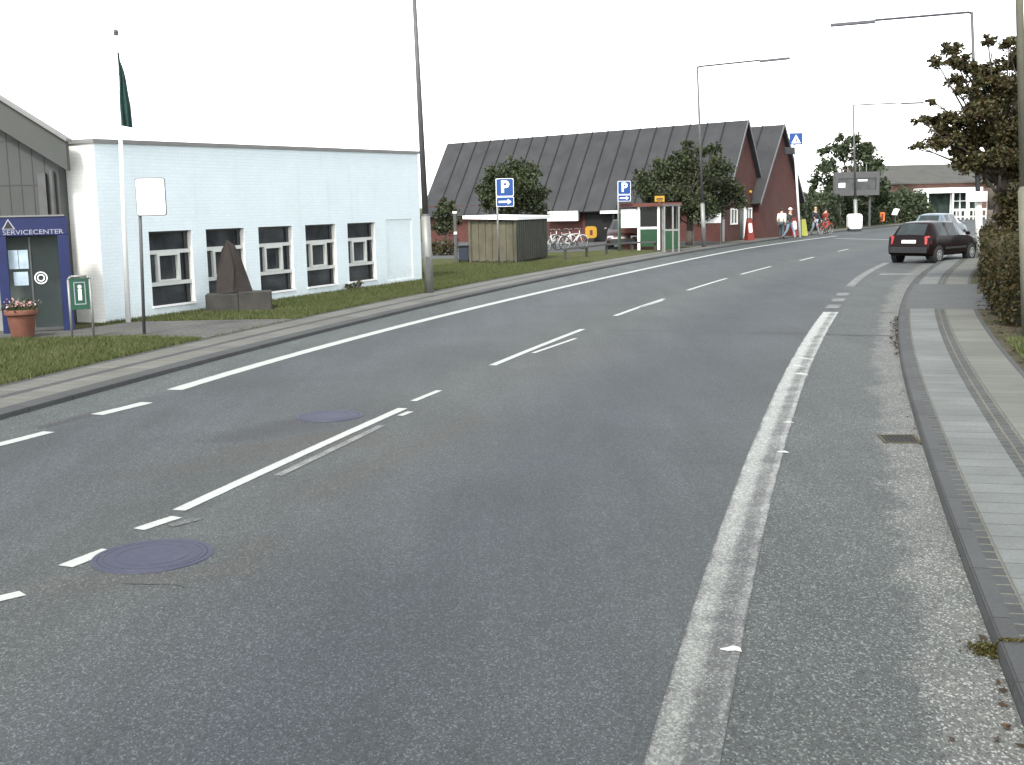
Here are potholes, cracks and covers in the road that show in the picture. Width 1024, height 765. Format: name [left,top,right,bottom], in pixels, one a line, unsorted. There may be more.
drain grate [877,434,922,443]
manhole cover [90,539,214,574]
manhole cover [296,410,364,422]
